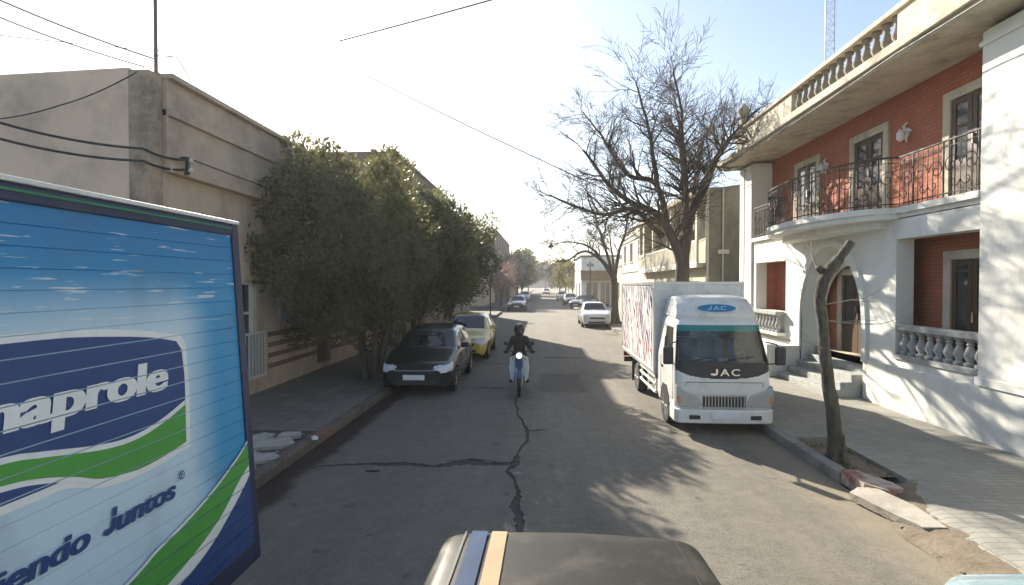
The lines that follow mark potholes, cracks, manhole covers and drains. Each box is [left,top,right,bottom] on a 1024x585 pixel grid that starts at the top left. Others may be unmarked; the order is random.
crack [302,387,545,532]
